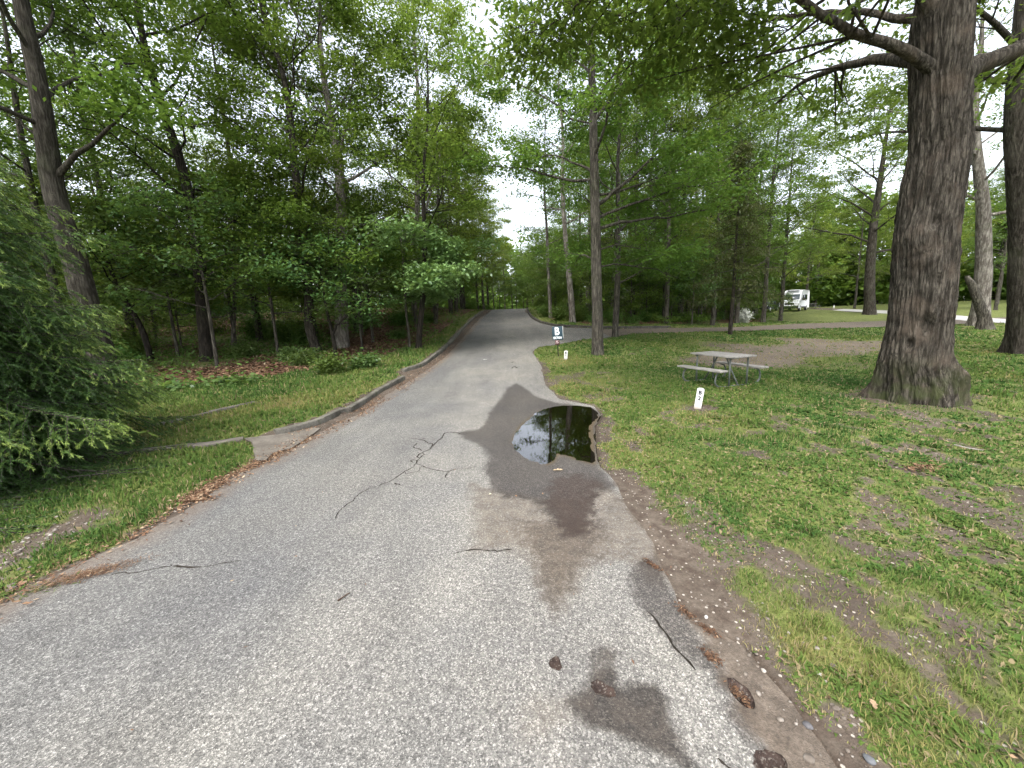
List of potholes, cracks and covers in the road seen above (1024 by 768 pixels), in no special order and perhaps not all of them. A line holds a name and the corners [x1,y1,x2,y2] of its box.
crack [335,432,473,518]
crack [112,560,240,575]
crack [647,611,696,670]
